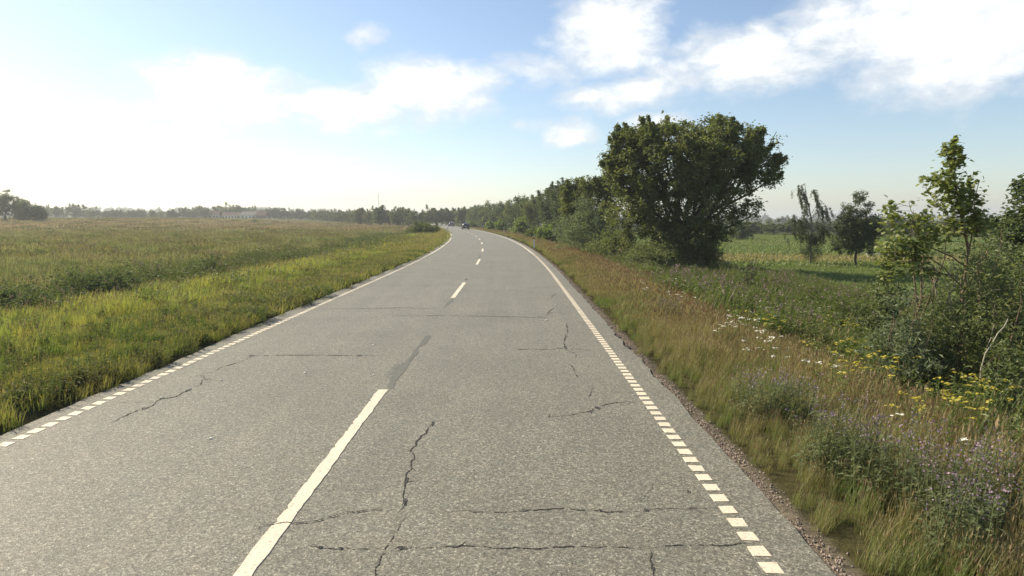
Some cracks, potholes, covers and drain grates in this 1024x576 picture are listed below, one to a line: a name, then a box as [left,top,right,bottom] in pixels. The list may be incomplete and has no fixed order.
crack [369,295,615,417]
crack [113,360,243,422]
crack [254,425,739,576]
